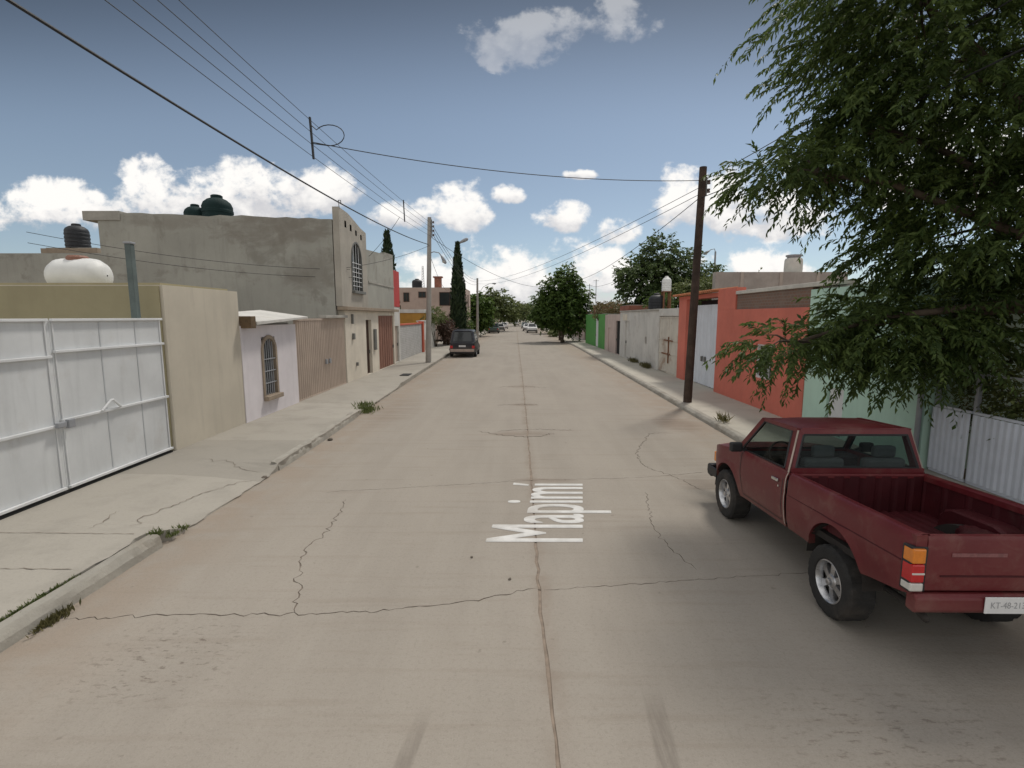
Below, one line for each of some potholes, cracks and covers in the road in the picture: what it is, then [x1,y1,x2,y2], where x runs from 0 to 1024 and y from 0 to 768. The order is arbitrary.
crack [71,500,540,620]
crack [555,494,808,590]
